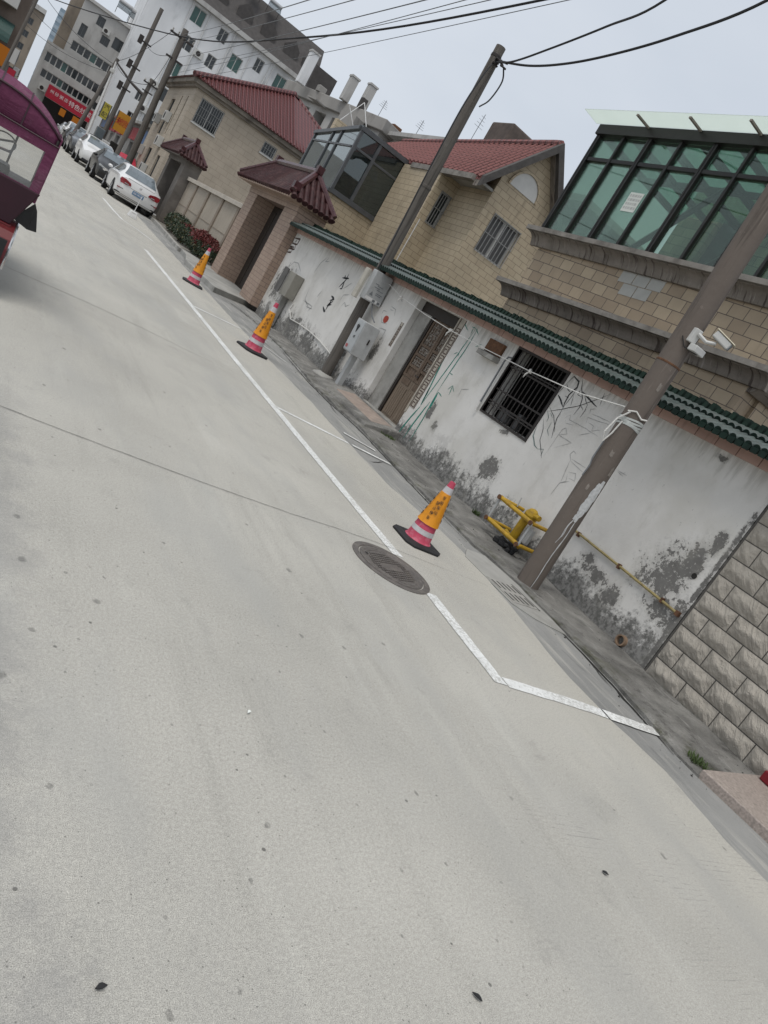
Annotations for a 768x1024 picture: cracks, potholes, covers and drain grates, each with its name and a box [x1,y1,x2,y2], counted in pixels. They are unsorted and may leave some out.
manhole cover [352,541,430,595]
